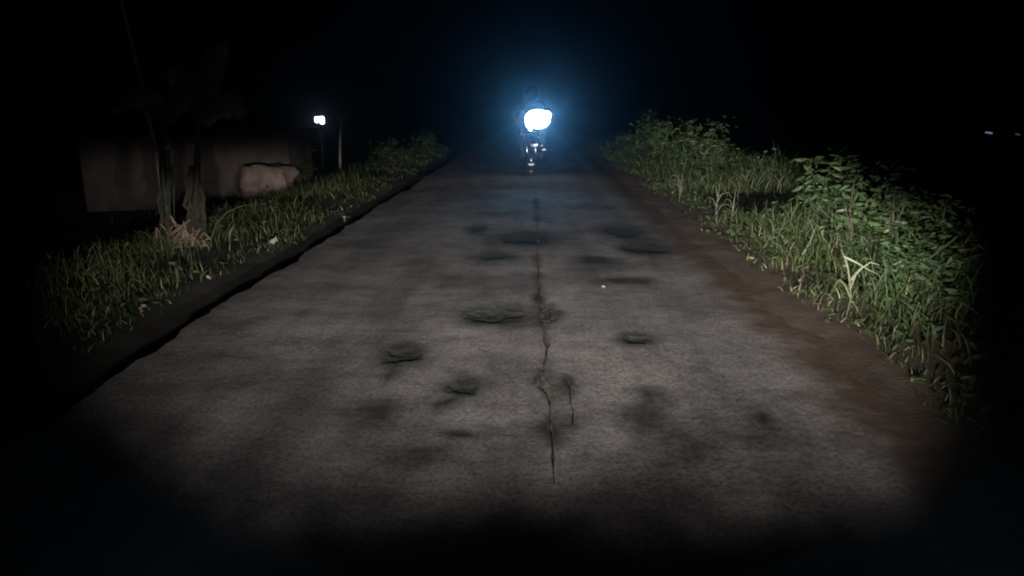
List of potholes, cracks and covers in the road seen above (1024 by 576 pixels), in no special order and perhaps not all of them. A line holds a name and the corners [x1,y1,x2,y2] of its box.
pothole [461,309,527,324]
pothole [445,377,479,395]
pothole [621,245,673,253]
crack [534,186,574,484]
pothole [382,346,425,364]
pothole [621,335,653,344]
pothole [499,230,550,244]
